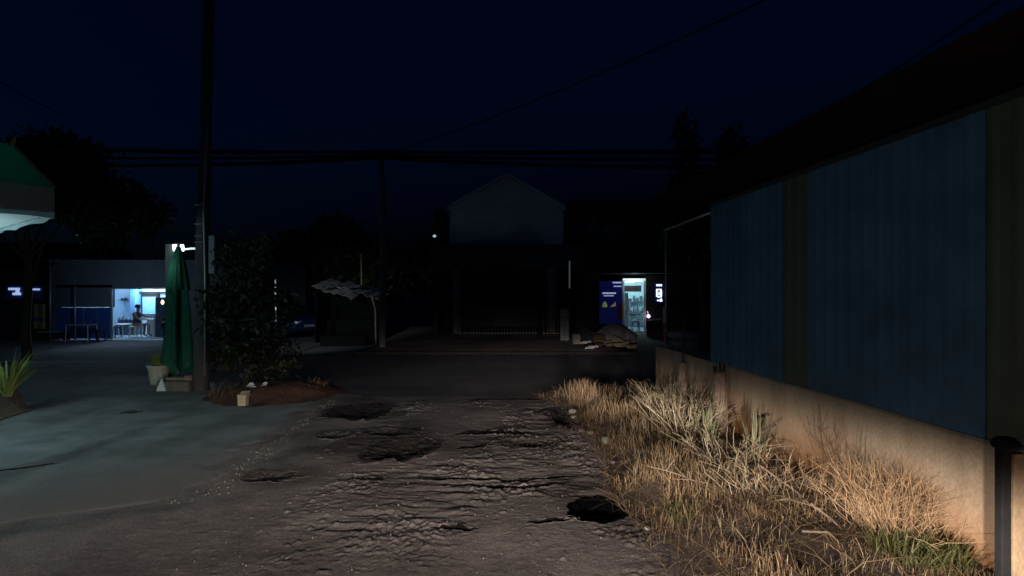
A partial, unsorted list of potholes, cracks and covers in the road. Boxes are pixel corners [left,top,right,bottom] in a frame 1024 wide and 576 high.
crack [339,474,590,490]
crack [433,523,477,532]
pothole [564,497,631,525]
pothole [236,470,311,483]
pothole [311,430,356,441]
crack [0,462,60,473]
pothole [548,405,575,432]
crack [524,515,580,525]
pothole [313,402,398,423]
crack [452,428,531,450]
pothole [353,437,449,465]
